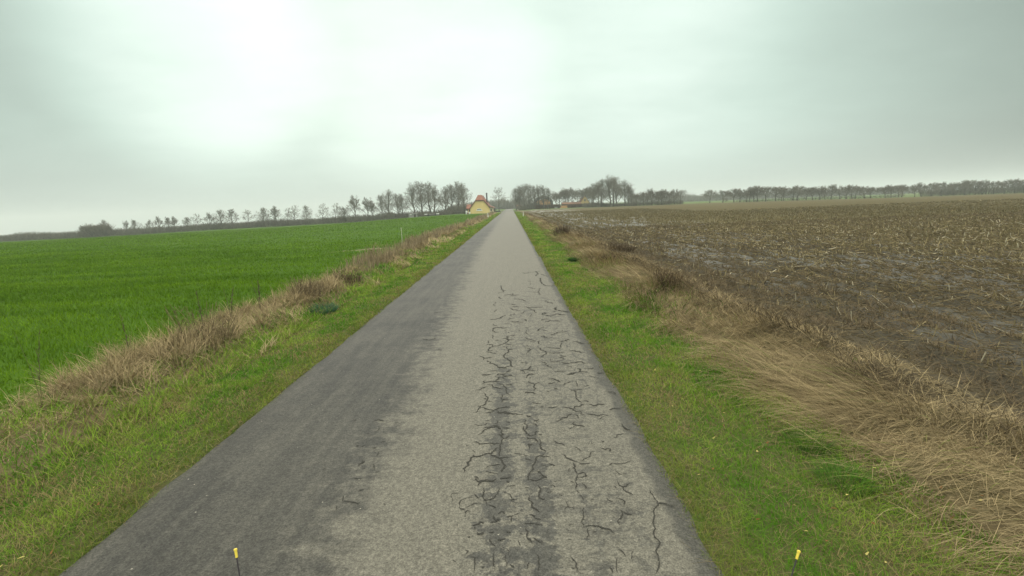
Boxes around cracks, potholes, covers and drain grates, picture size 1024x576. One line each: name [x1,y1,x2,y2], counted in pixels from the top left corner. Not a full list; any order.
crack [650,491,674,571]
crack [452,271,633,573]
